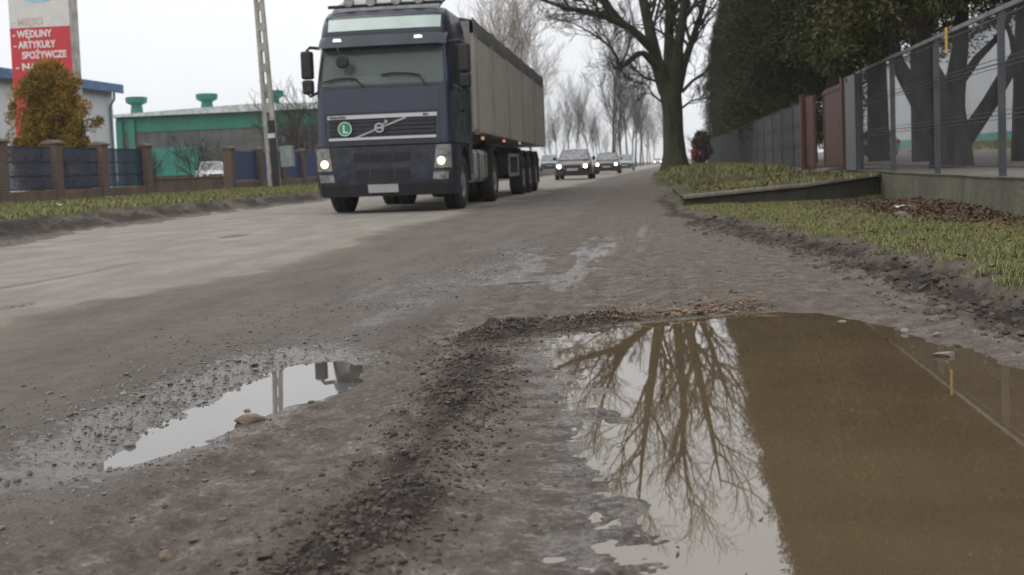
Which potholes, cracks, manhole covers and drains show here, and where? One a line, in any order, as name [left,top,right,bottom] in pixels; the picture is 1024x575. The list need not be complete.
pothole [496,304,1024,575]
pothole [55,355,383,478]
